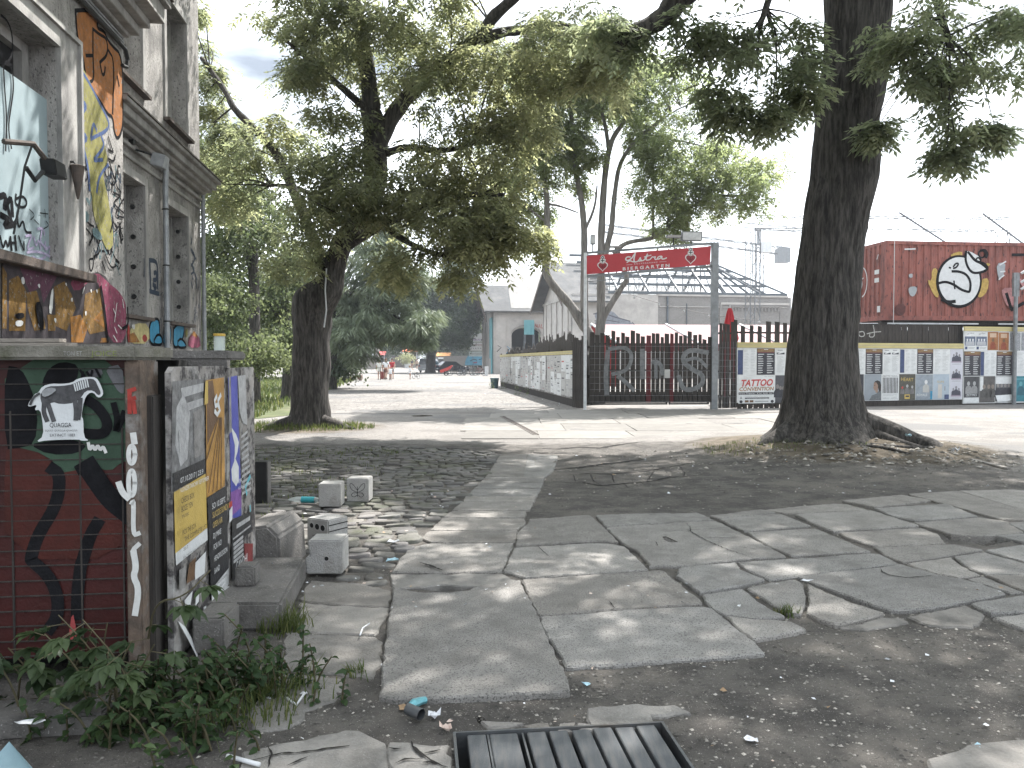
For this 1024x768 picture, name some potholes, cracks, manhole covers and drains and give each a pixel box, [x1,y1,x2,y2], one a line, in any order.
crack [533,441,695,488]
crack [389,741,447,768]
drain grate [453,721,694,768]
